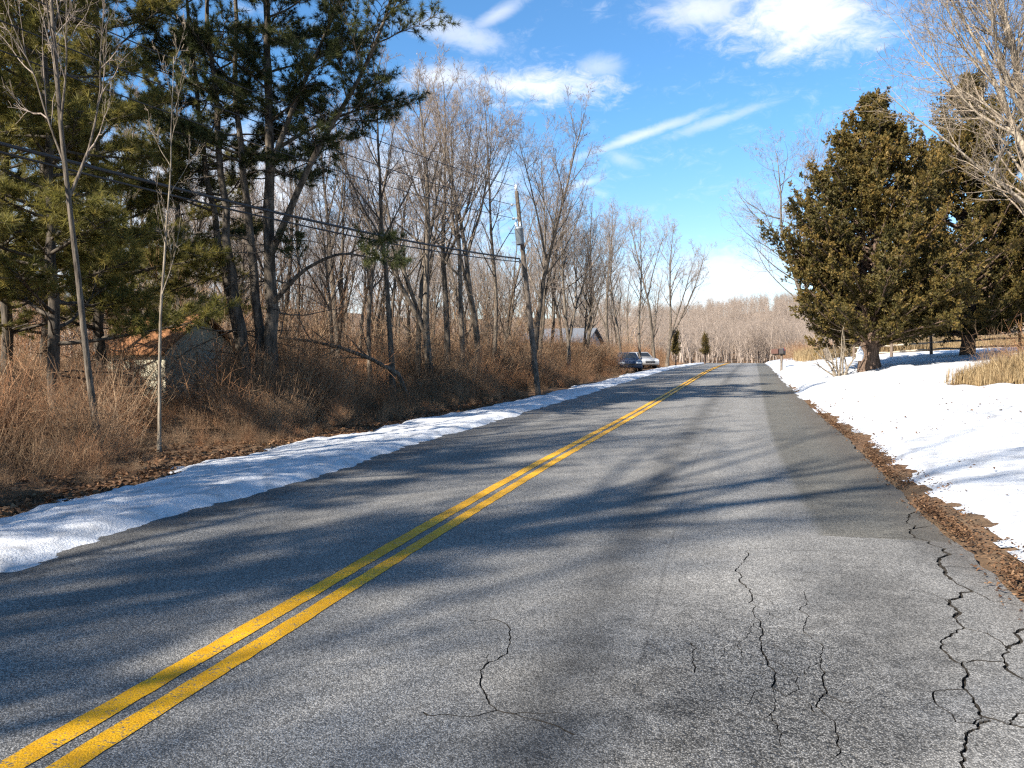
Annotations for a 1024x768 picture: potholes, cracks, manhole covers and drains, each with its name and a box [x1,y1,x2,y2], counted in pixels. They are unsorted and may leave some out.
crack [423,619,575,735]
crack [720,548,875,756]
crack [830,512,1024,768]
